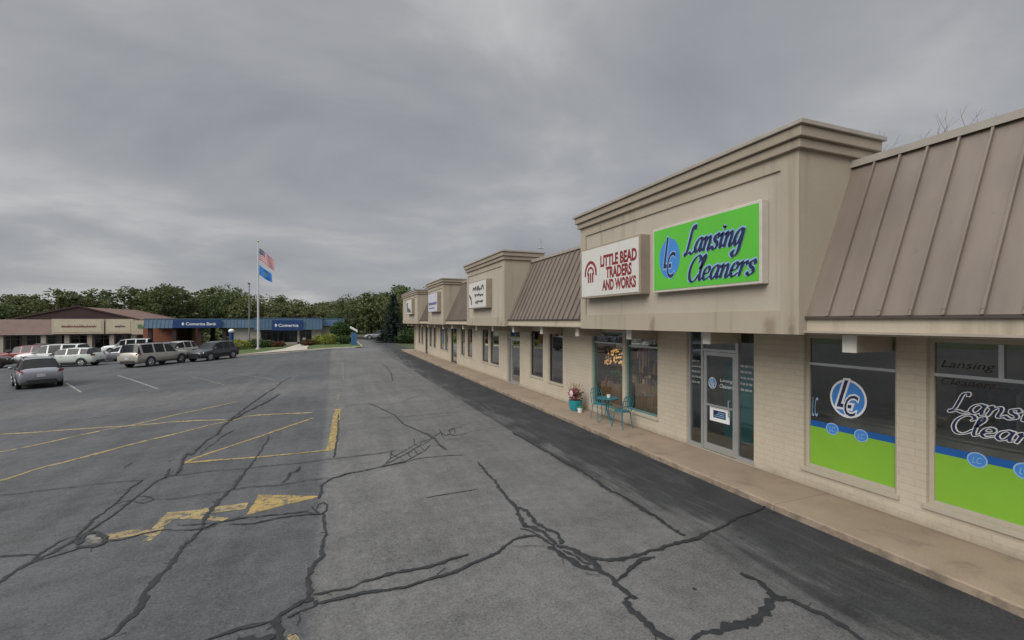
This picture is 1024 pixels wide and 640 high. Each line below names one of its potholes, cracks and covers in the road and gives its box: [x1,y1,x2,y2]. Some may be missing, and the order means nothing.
crack [0,381,865,640]
